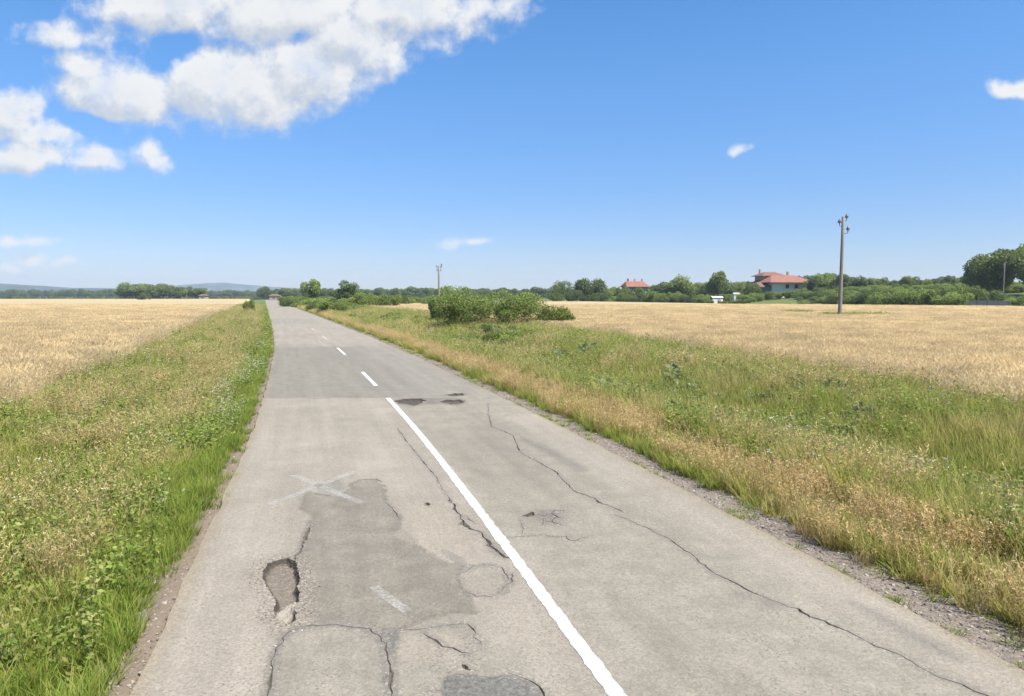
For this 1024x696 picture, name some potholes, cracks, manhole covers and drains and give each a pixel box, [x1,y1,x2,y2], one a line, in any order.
crack [397,428,585,597]
crack [267,623,482,696]
crack [487,406,989,696]
pothole [262,558,300,625]
